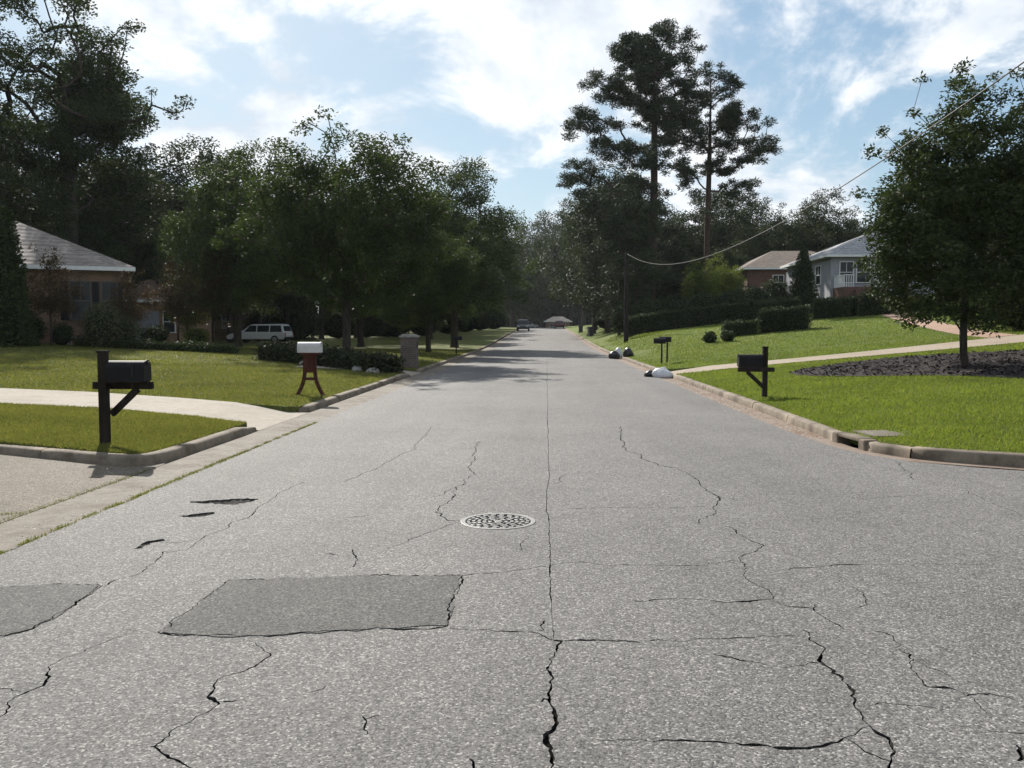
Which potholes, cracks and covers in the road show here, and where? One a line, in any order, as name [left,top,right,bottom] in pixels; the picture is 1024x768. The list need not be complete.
crack [635,527,844,629]
crack [154,643,271,768]
drain grate [832,430,910,451]
crack [876,631,1020,711]
crack [603,631,934,768]
manhole cover [461,513,536,530]
